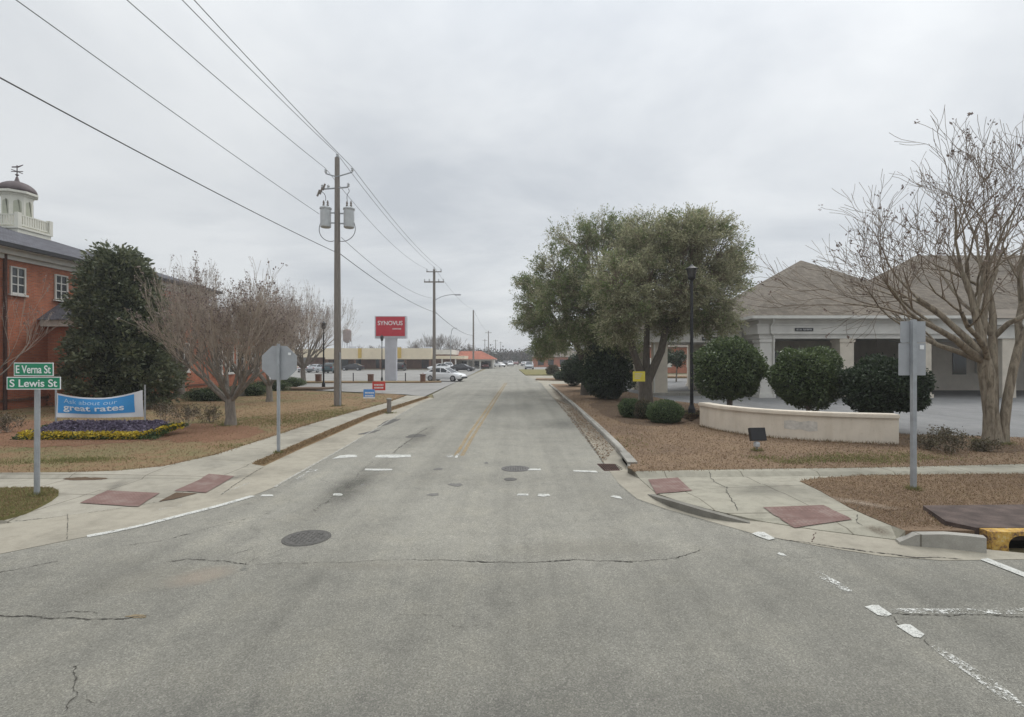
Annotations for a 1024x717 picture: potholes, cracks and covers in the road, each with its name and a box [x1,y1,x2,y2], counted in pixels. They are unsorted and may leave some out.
crack [439,550,699,563]
crack [0,611,146,620]
crack [64,666,95,712]
manhole cover [281,530,331,546]
crack [174,550,406,565]
